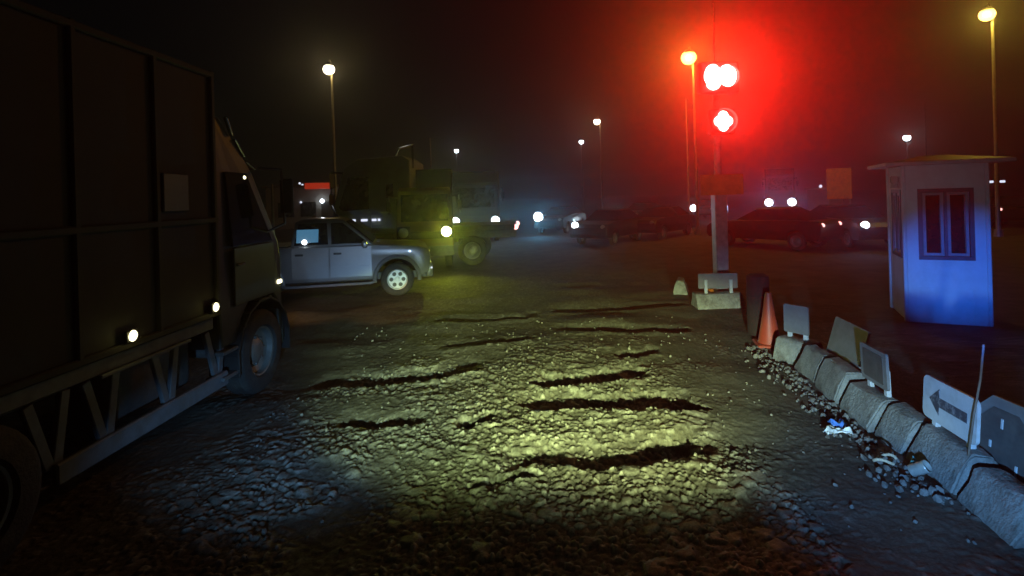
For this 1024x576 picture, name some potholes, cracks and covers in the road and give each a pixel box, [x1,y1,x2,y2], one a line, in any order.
pothole [528,363,652,388]
pothole [549,302,683,313]
pothole [489,428,718,473]
pothole [307,357,484,390]
pothole [551,322,693,333]
pothole [334,408,428,430]
pothole [517,385,714,411]
pothole [440,335,537,348]
pothole [434,311,541,322]
pothole [613,345,661,358]
